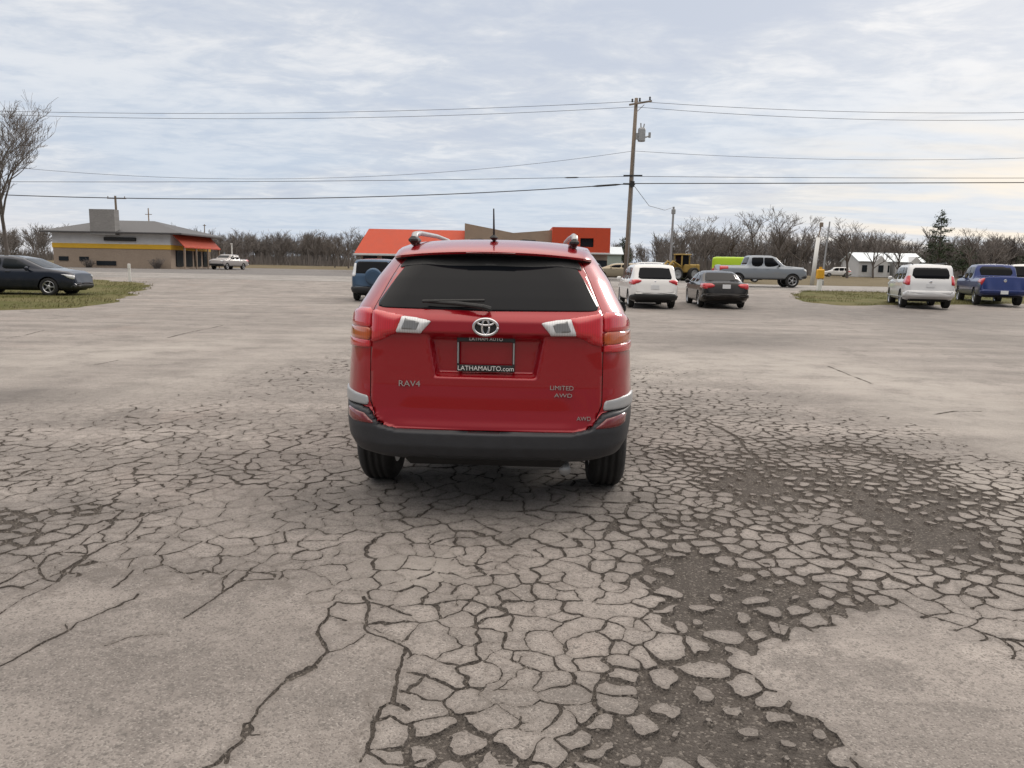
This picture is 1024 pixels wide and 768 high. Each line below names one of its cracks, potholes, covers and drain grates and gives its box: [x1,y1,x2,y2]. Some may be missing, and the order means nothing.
pothole [575,677,843,768]
pothole [640,553,818,641]
crack [0,359,1024,768]
